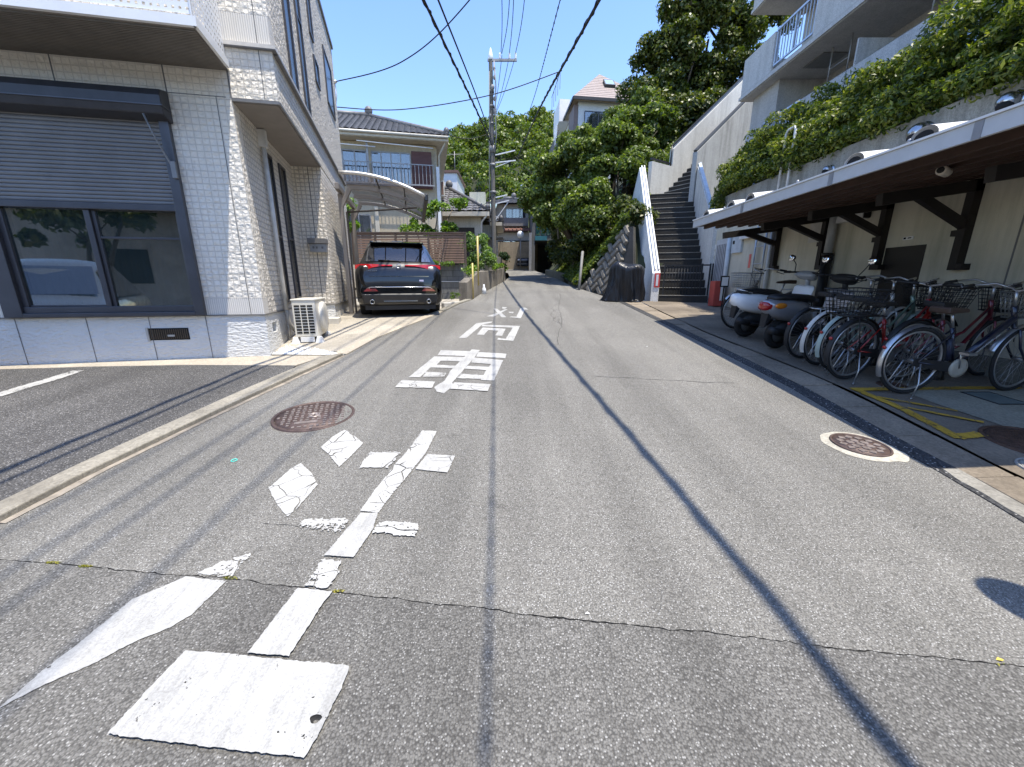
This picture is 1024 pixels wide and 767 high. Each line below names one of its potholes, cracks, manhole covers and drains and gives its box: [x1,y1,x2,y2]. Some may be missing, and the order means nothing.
manhole cover [978,425,1024,454]
manhole cover [829,433,894,457]
crack [0,559,1024,667]
manhole cover [270,401,355,433]
